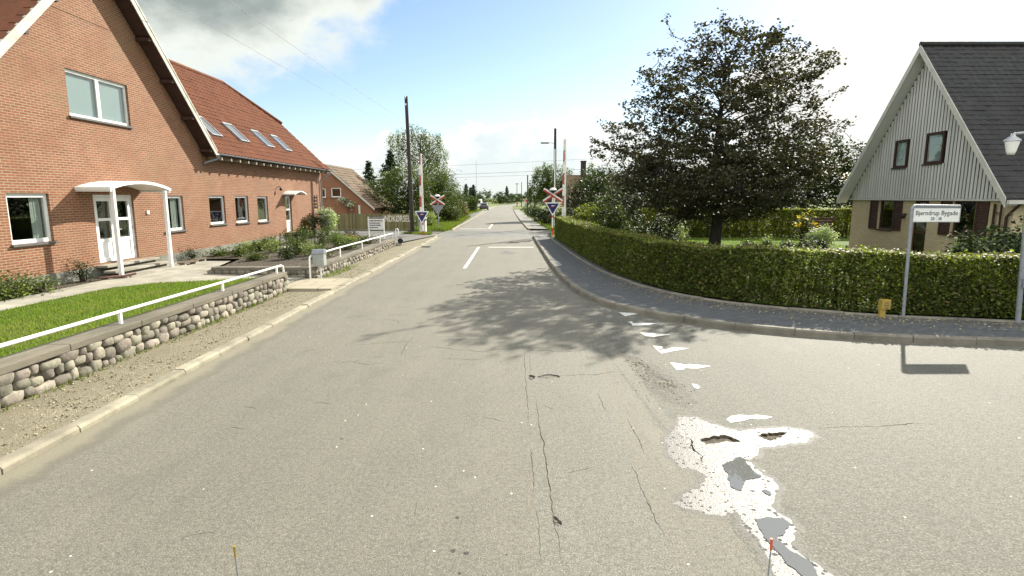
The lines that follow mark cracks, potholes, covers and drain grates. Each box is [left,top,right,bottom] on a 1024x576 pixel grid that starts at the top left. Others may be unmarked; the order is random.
pothole [700,435,740,445]
crack [308,336,480,365]
crack [626,418,664,533]
crack [536,404,564,570]
pothole [758,432,789,441]
